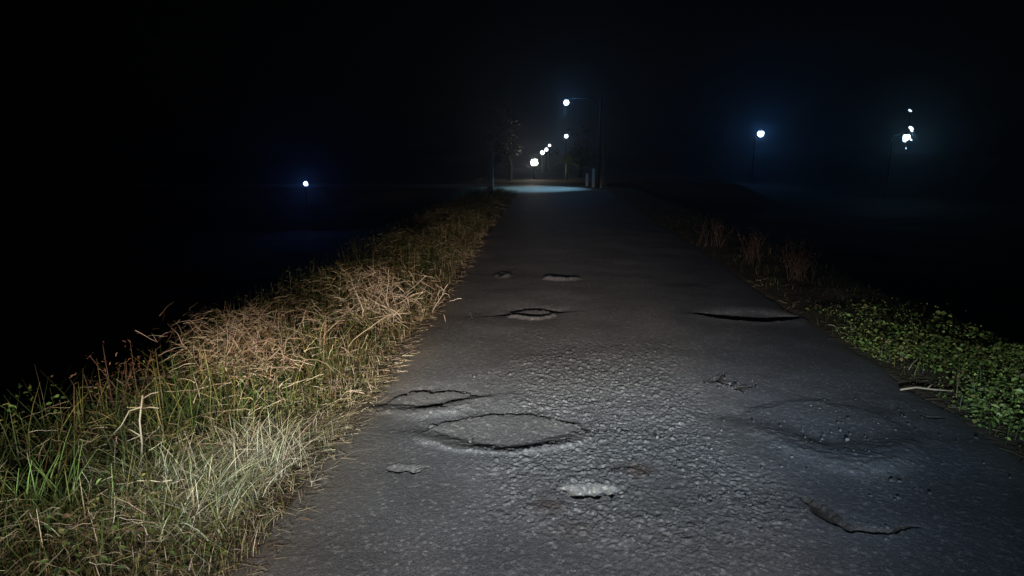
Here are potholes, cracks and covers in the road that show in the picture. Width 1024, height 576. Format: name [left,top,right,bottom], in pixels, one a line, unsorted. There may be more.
crack [703,373,756,392]
pothole [755,401,910,462]
